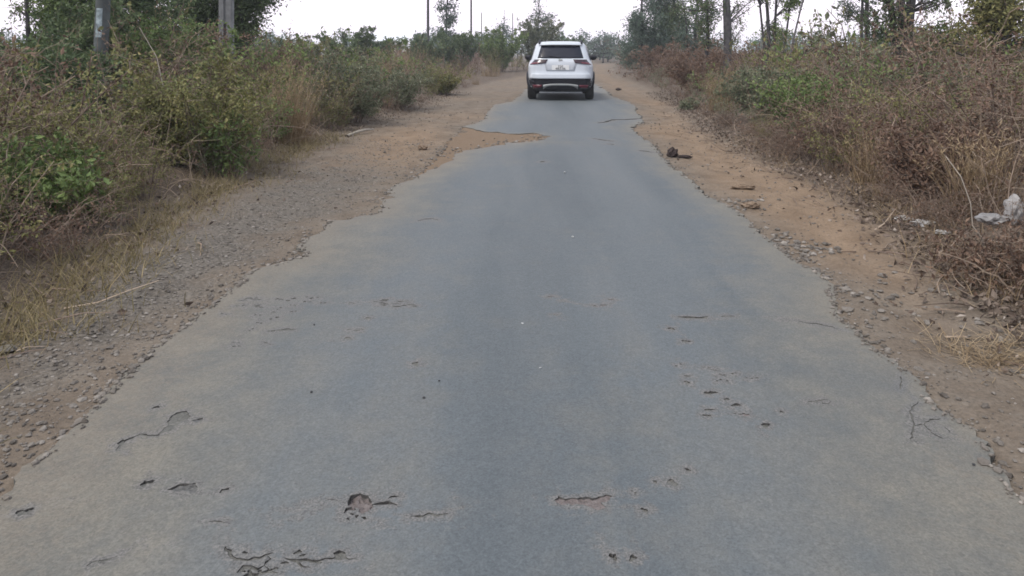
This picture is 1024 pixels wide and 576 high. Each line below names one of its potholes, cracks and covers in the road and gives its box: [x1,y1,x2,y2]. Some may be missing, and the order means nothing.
pothole [555,494,611,510]
crack [224,546,355,576]
crack [116,411,191,450]
pothole [344,493,397,520]
crack [899,376,950,442]
pothole [168,482,198,494]
